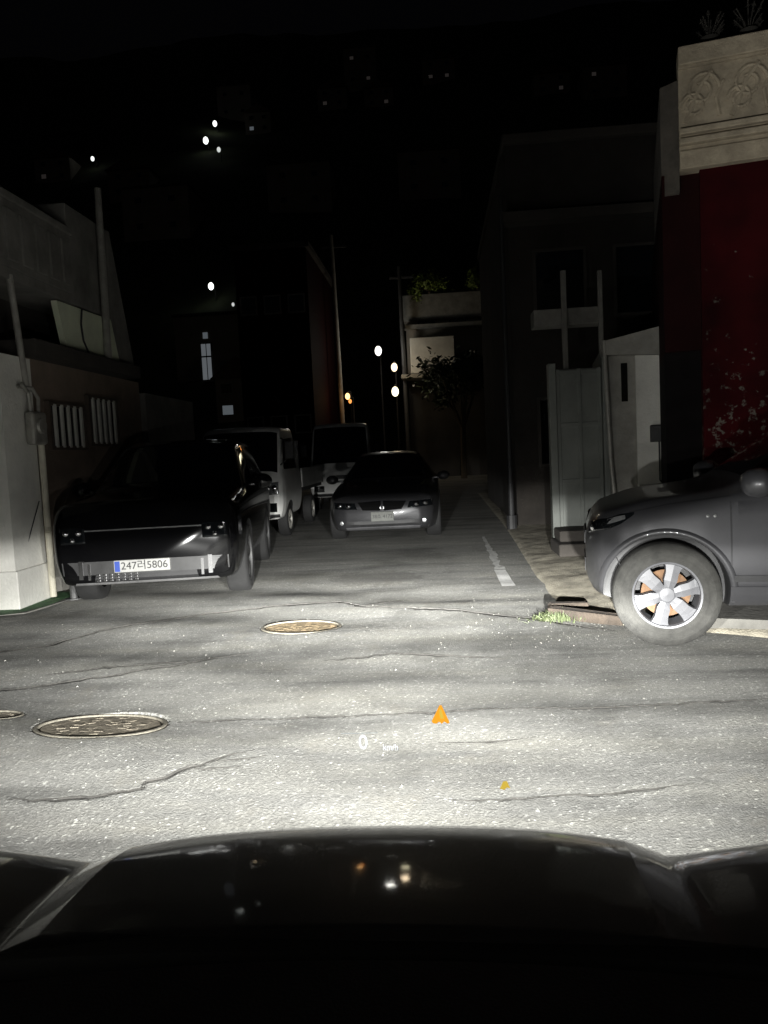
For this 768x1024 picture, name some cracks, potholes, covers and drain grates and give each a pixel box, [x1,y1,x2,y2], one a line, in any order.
manhole cover [0,710,24,719]
crack [456,783,695,802]
manhole cover [32,714,168,739]
crack [8,750,266,802]
crack [0,601,616,691]
crack [189,698,768,723]
manhole cover [261,620,342,634]
